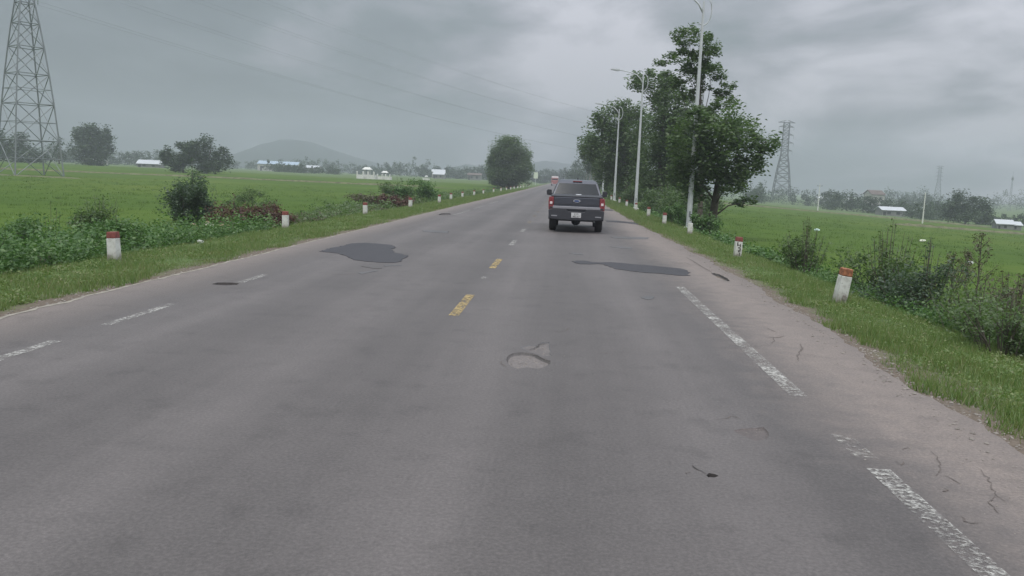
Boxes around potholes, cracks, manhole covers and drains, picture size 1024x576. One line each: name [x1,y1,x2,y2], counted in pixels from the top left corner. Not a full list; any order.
pothole [506,352,551,369]
crack [963,468,1002,523]
